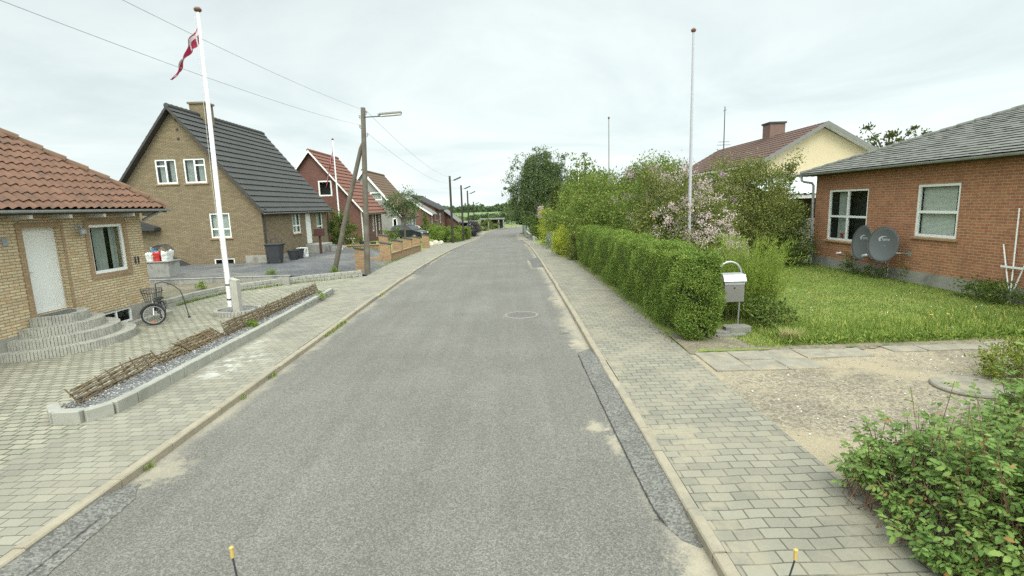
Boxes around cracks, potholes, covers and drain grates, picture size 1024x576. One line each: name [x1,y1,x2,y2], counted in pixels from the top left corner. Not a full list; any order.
manhole cover [504,311,539,319]
